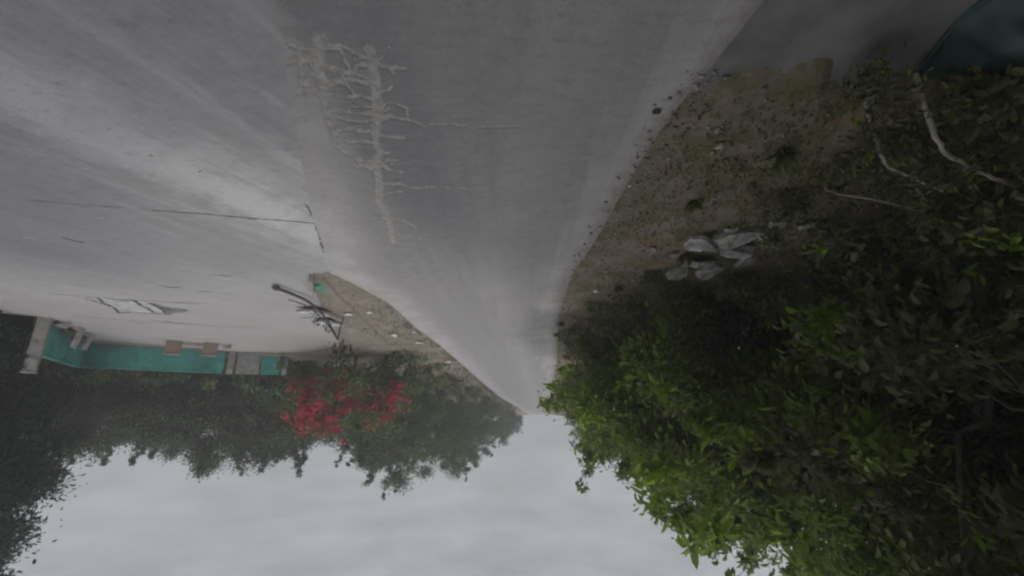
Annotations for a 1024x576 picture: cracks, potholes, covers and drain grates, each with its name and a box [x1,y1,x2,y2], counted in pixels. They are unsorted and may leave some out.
crack [31,34,521,254]
